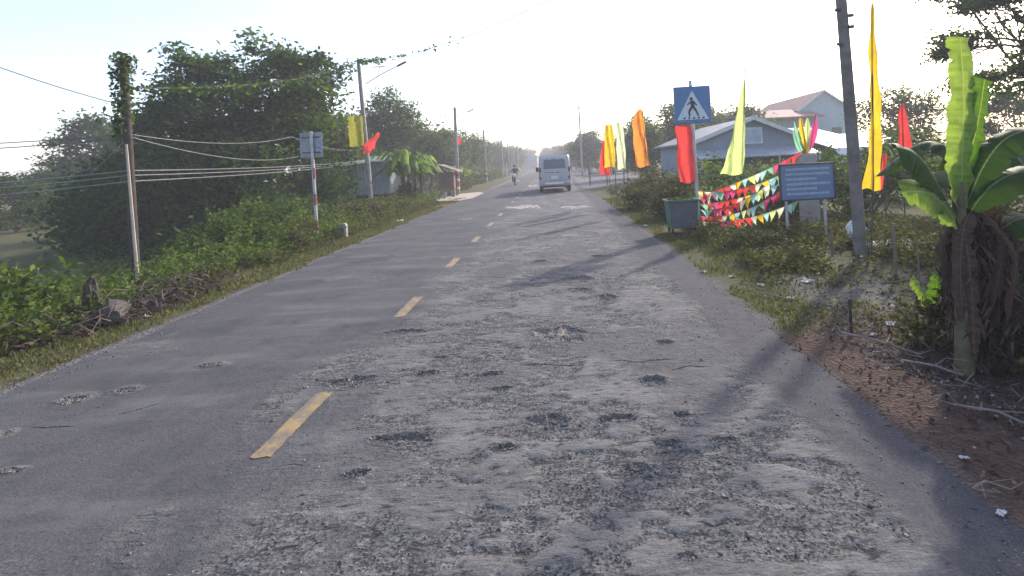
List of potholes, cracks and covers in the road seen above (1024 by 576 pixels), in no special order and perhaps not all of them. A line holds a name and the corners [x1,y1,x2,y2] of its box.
pothole [525,412,572,428]
pothole [599,412,637,423]
crack [611,359,709,371]
pothole [531,324,587,343]
pothole [367,430,433,444]
pothole [489,443,518,451]
pothole [55,394,90,404]
pothole [323,374,379,389]
pothole [638,373,668,384]
pothole [341,467,372,478]
pothole [113,385,136,394]
